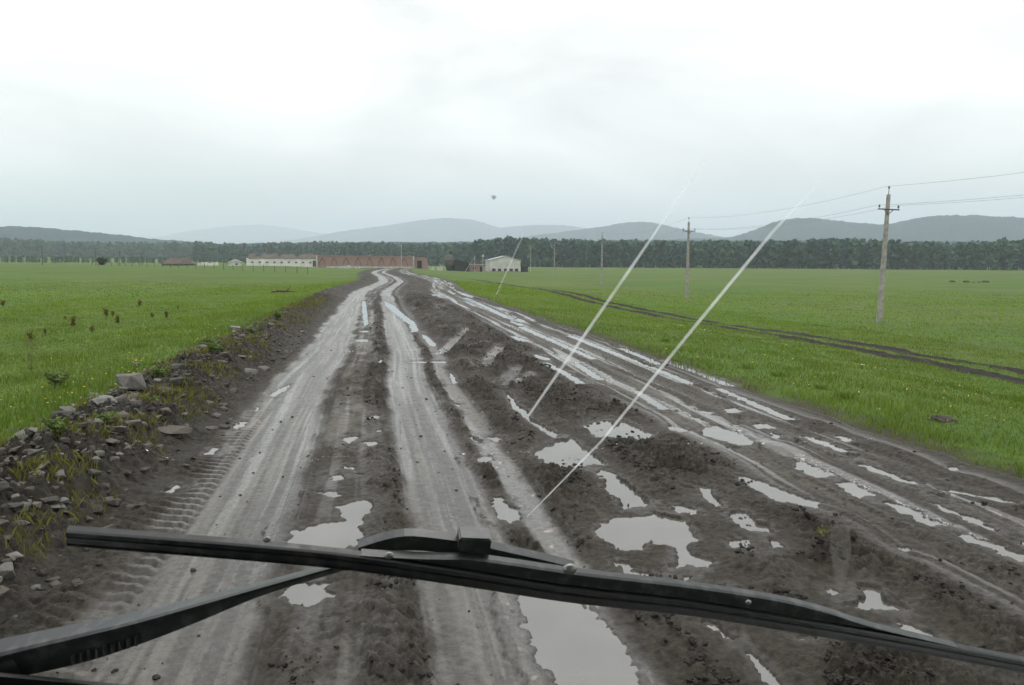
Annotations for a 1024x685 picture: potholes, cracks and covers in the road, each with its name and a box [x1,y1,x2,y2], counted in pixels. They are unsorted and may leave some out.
pothole [578,414,660,440]
pothole [503,594,652,685]
pothole [525,434,611,473]
pothole [279,496,384,550]
pothole [590,509,722,577]
pothole [729,472,833,509]
